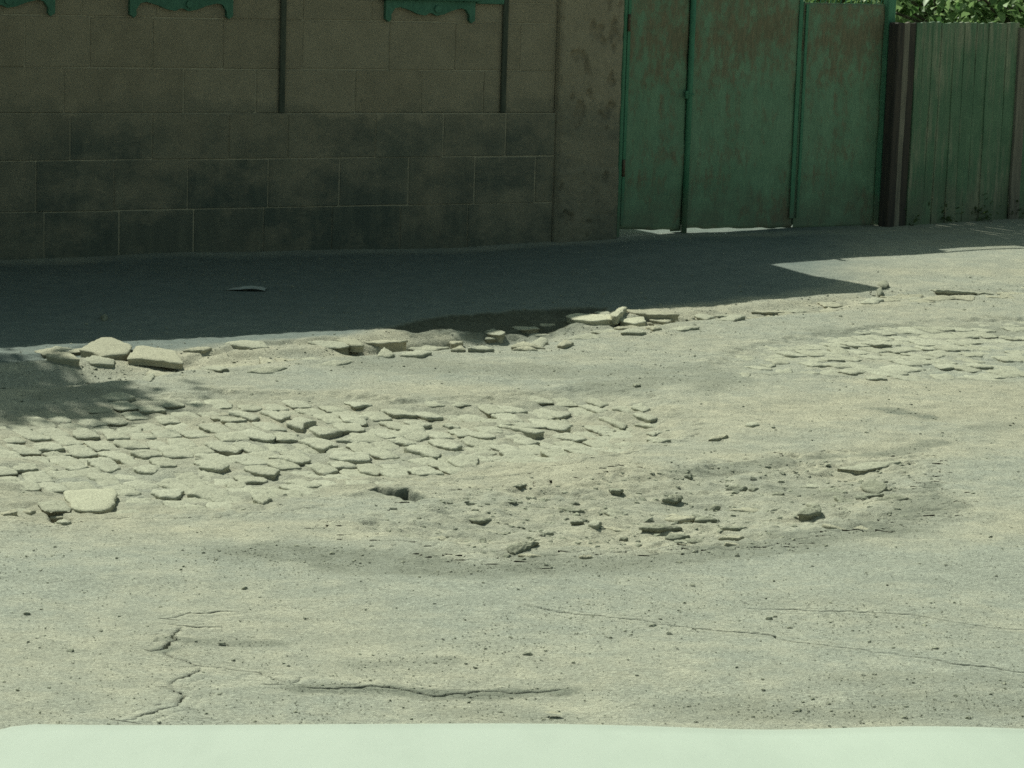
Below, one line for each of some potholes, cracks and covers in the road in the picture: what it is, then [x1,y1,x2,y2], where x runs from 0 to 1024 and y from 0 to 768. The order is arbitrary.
pothole [0,383,706,527]
pothole [302,448,978,569]
pothole [694,315,1024,385]
crack [111,602,1024,724]
pothole [374,306,615,341]
